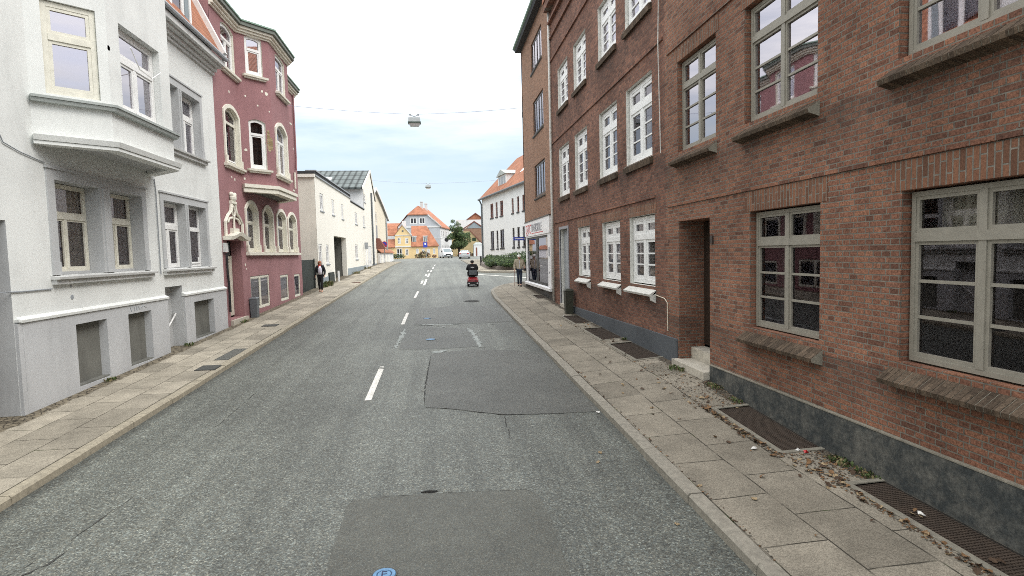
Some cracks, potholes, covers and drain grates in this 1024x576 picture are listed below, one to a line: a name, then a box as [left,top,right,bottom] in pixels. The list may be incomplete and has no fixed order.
crack [446,408,596,435]
drain grate [606,341,663,361]
drain grate [580,327,622,341]
crack [7,498,131,576]
drain grate [845,478,1024,576]
drain grate [711,403,825,454]
